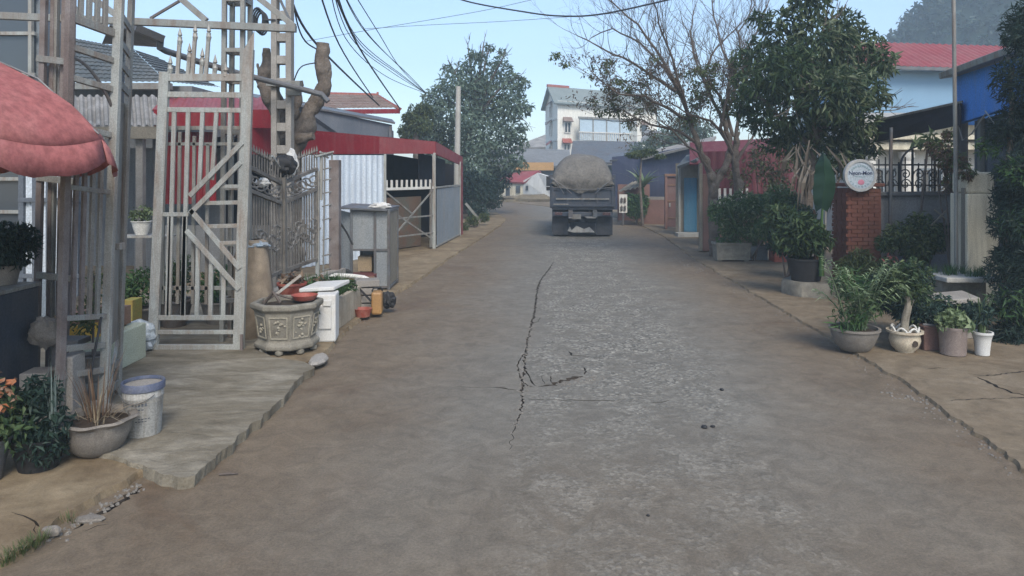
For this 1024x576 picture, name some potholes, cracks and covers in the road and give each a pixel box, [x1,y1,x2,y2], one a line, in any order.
crack [536,352,669,403]
crack [951,371,1024,401]
